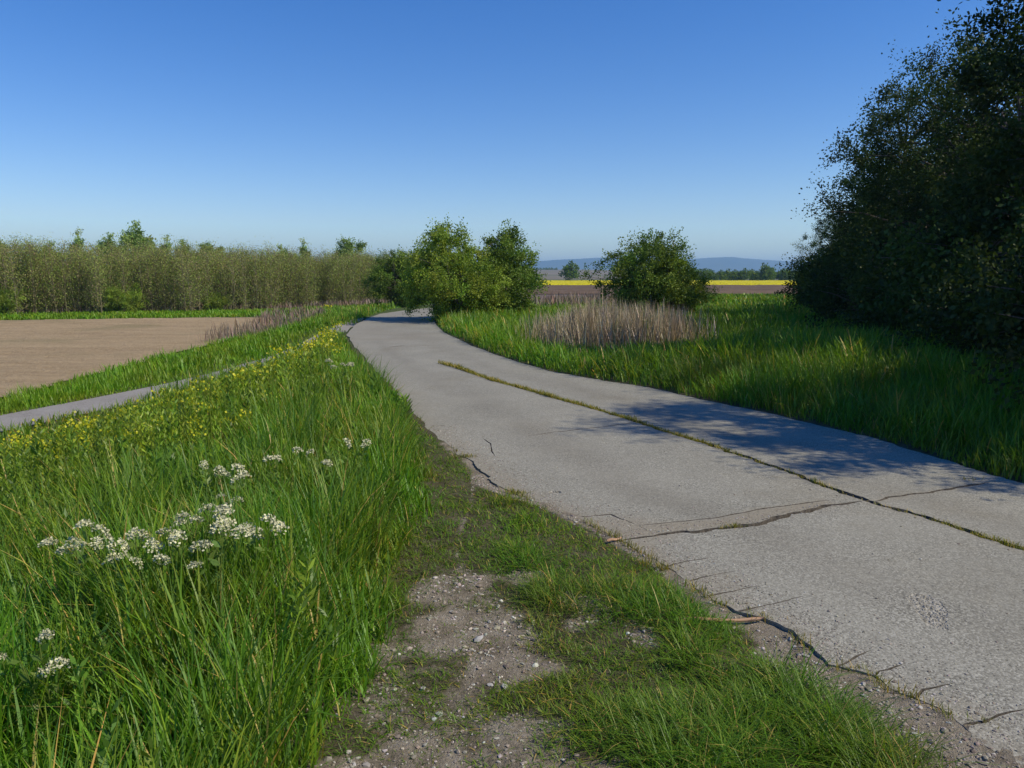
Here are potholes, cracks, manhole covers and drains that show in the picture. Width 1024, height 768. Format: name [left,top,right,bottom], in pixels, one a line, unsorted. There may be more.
crack [915,682,1024,730]
crack [838,650,904,675]
crack [580,482,989,541]
